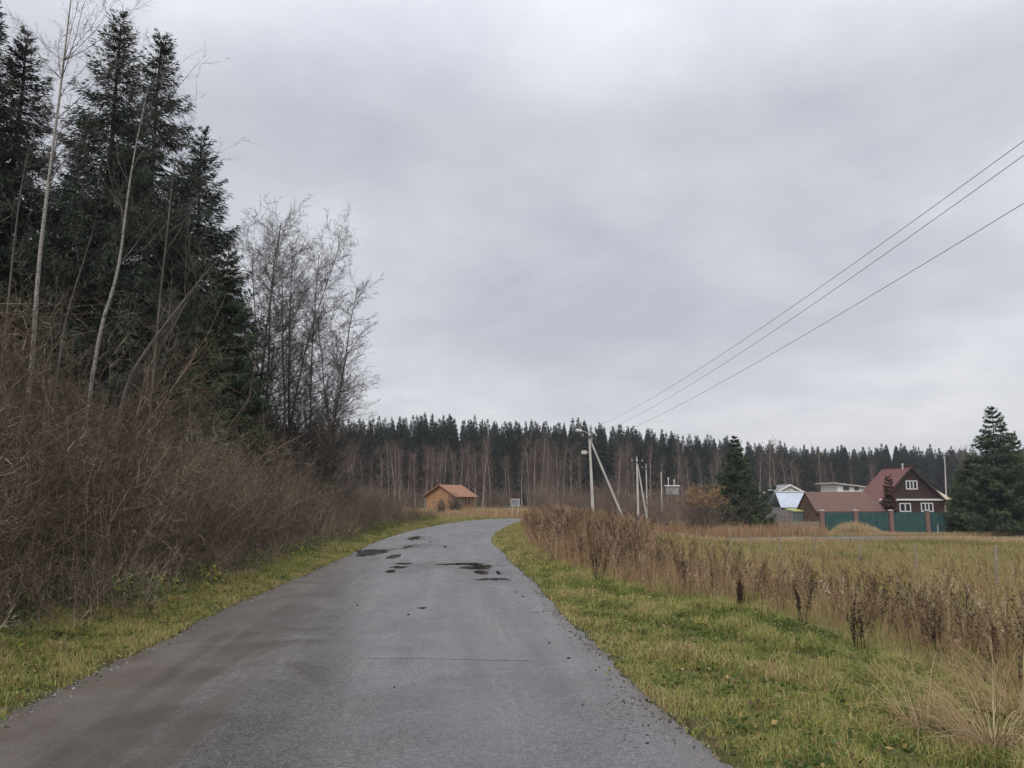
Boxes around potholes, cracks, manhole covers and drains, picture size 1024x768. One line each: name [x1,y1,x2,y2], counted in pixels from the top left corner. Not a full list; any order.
pothole [436,562,492,570]
pothole [355,549,392,557]
